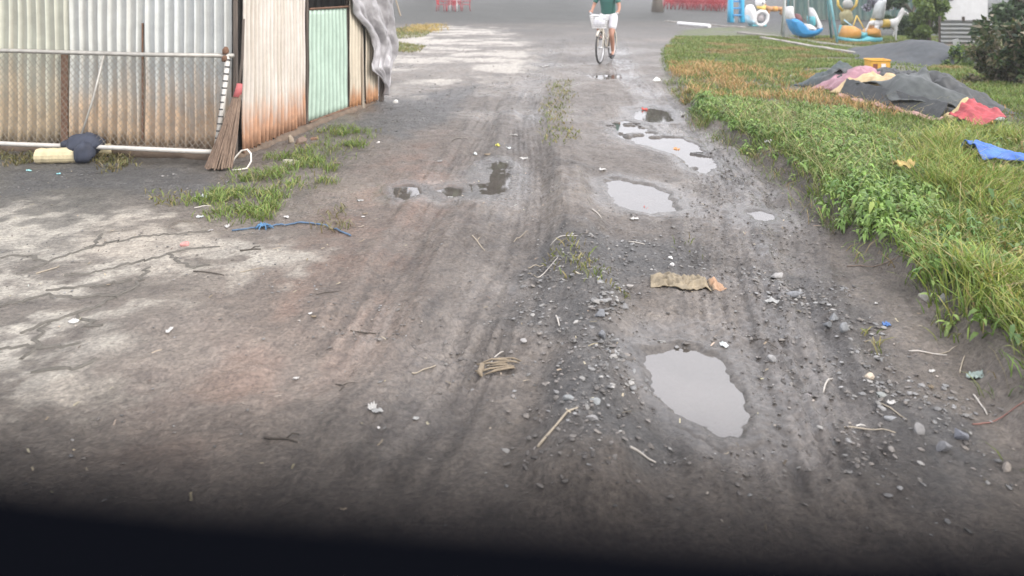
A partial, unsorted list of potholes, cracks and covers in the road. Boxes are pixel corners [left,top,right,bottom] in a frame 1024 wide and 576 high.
pothole [618,104,686,126]
pothole [581,71,630,81]
pothole [591,173,695,218]
pothole [427,182,481,203]
crack [0,230,220,374]
pothole [462,155,524,203]
pothole [601,118,733,177]
pothole [379,180,432,203]
pothole [618,336,776,453]
